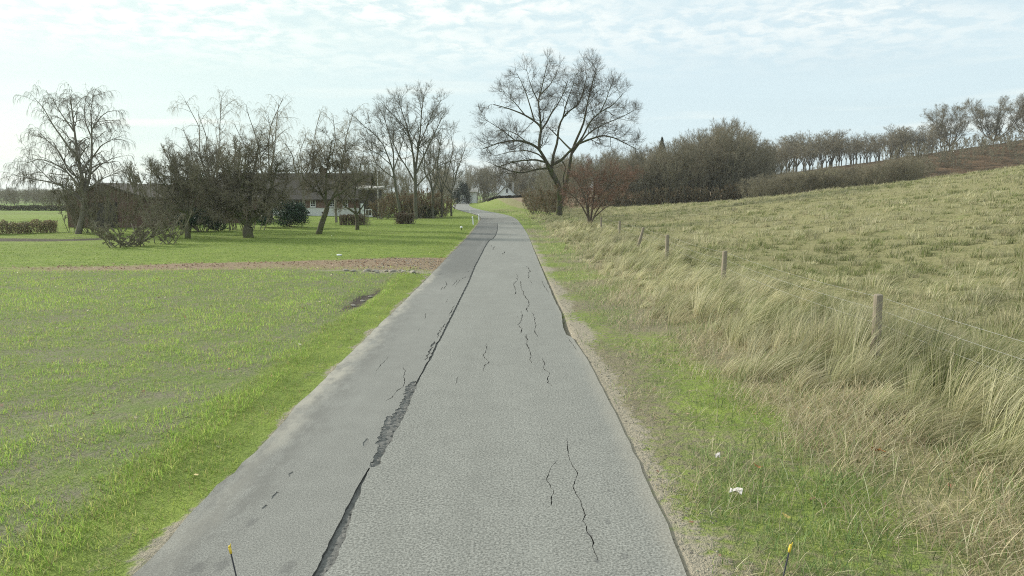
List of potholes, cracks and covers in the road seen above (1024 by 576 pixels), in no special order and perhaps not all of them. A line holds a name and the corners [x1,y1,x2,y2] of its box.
crack [546,441,597,556]
crack [483,266,553,387]
